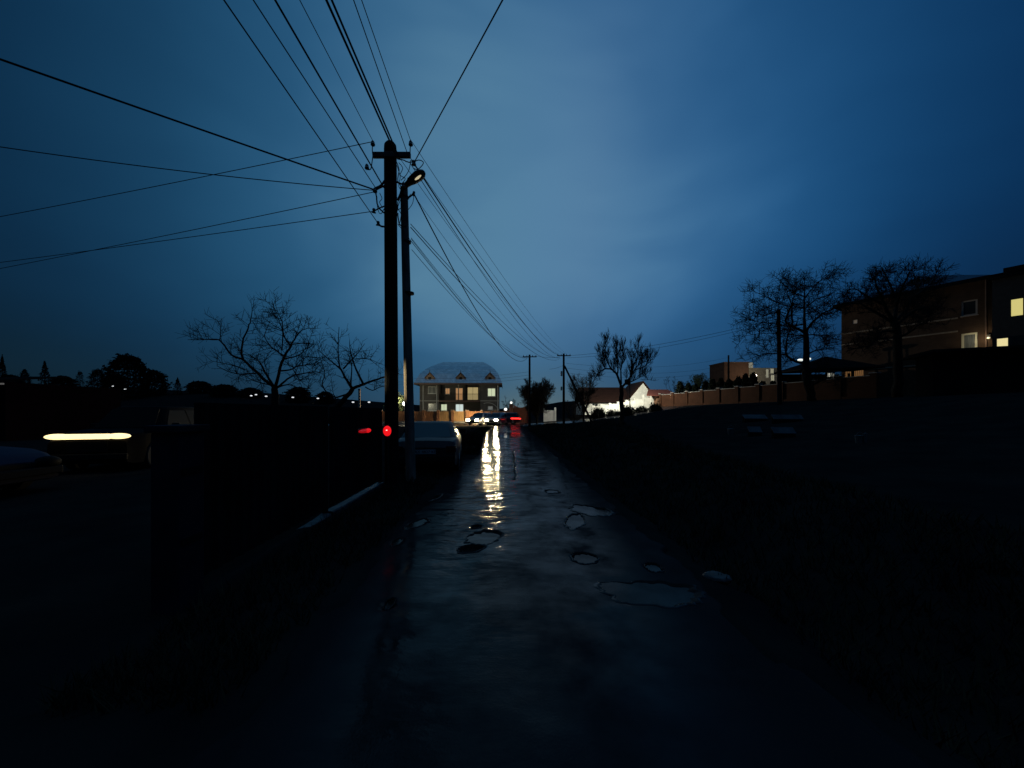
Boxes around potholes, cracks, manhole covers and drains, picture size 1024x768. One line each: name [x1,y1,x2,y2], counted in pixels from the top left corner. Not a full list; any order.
pothole [403,517,430,531]
pothole [594,580,706,609]
pothole [456,543,487,554]
pothole [644,562,665,573]
pothole [564,513,586,531]
pothole [463,529,504,546]
pothole [568,504,614,517]
pothole [570,551,600,565]
